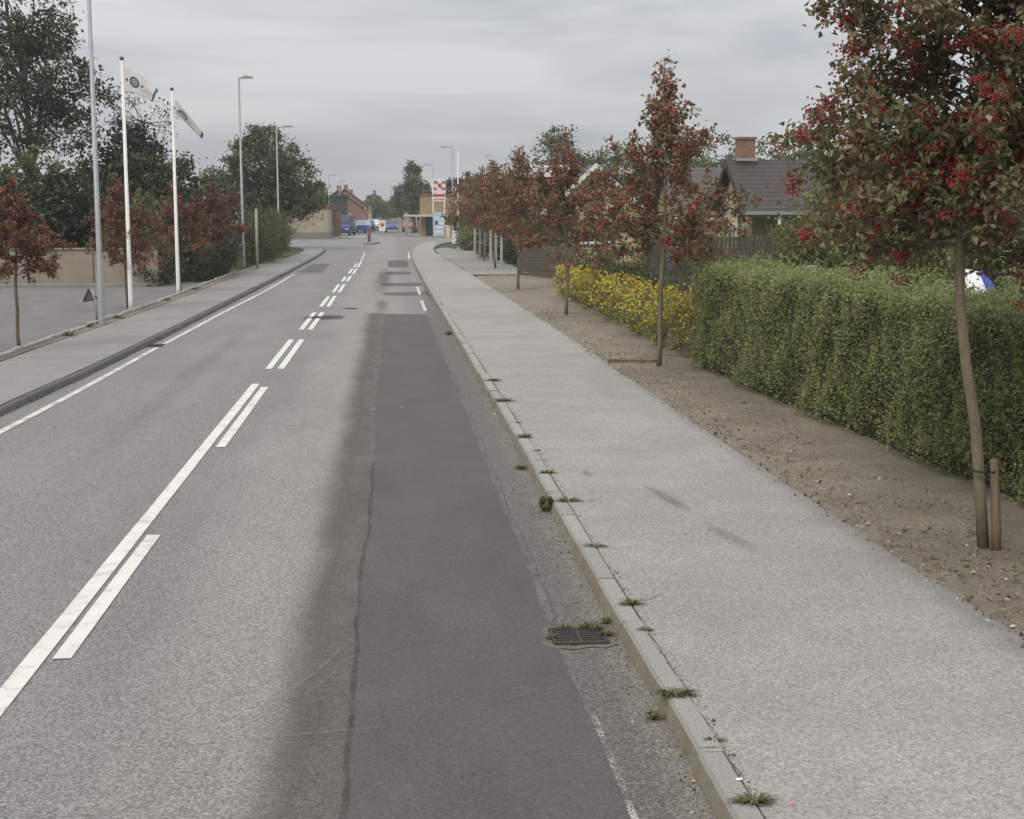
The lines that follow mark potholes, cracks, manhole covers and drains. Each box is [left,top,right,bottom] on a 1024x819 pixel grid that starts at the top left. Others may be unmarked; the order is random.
drain grate [548,626,610,645]
